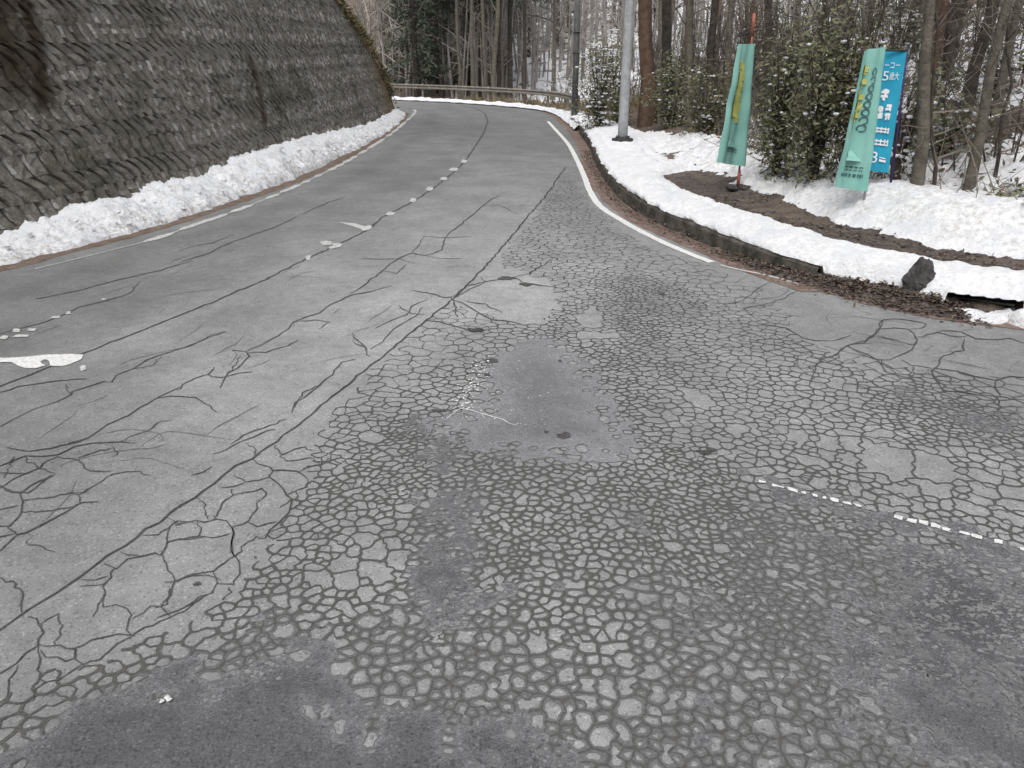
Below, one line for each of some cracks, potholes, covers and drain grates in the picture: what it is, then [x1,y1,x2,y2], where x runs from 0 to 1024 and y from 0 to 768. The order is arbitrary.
crack [0,180,1024,768]
